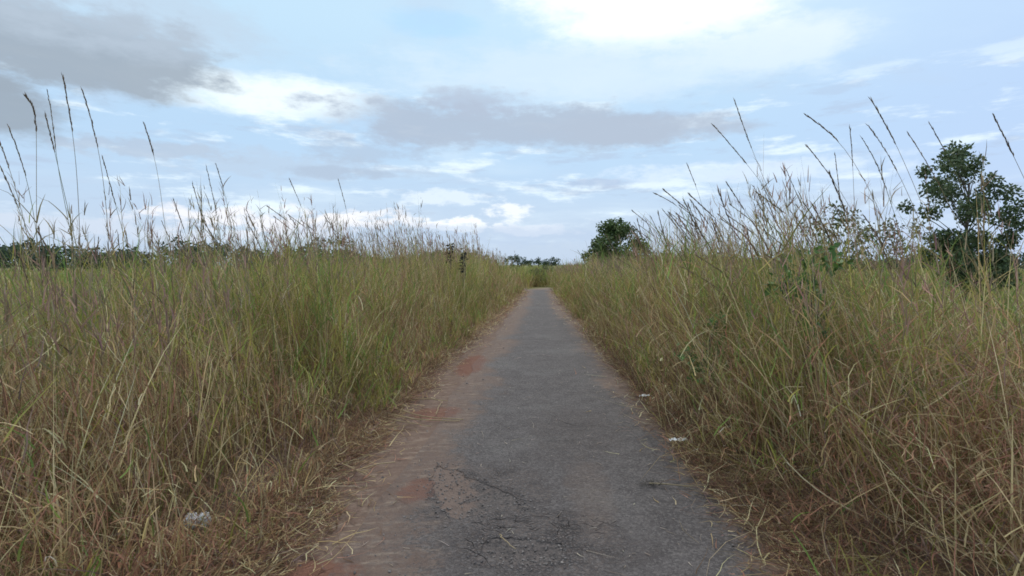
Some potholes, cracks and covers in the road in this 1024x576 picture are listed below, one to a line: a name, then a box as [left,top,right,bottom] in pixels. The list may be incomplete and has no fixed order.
crack [451,508,619,565]
pothole [417,462,536,528]
